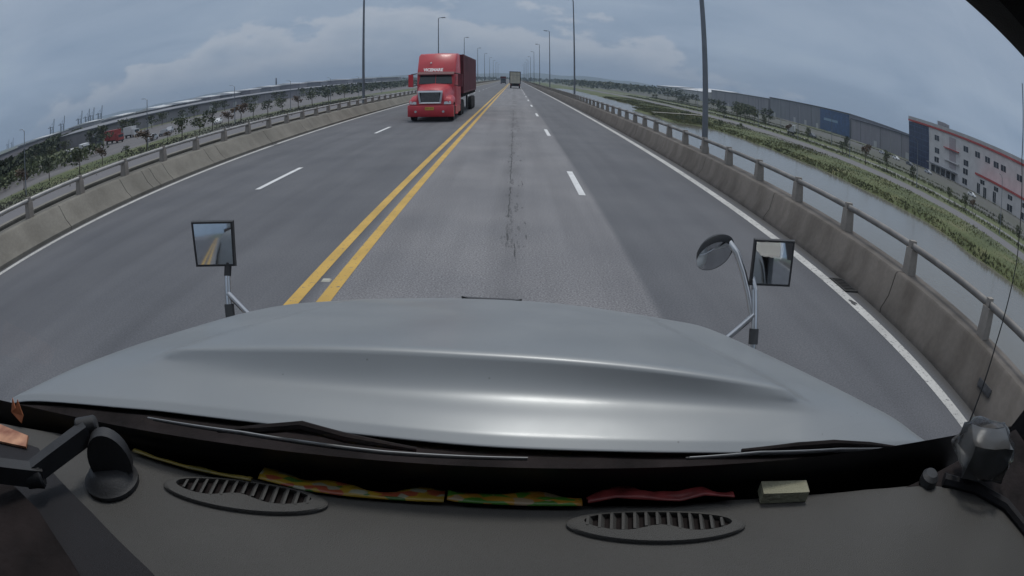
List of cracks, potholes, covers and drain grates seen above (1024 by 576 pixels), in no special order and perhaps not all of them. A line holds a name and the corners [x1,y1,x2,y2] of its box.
drain grate [829,277,858,293]
crack [500,110,527,257]
